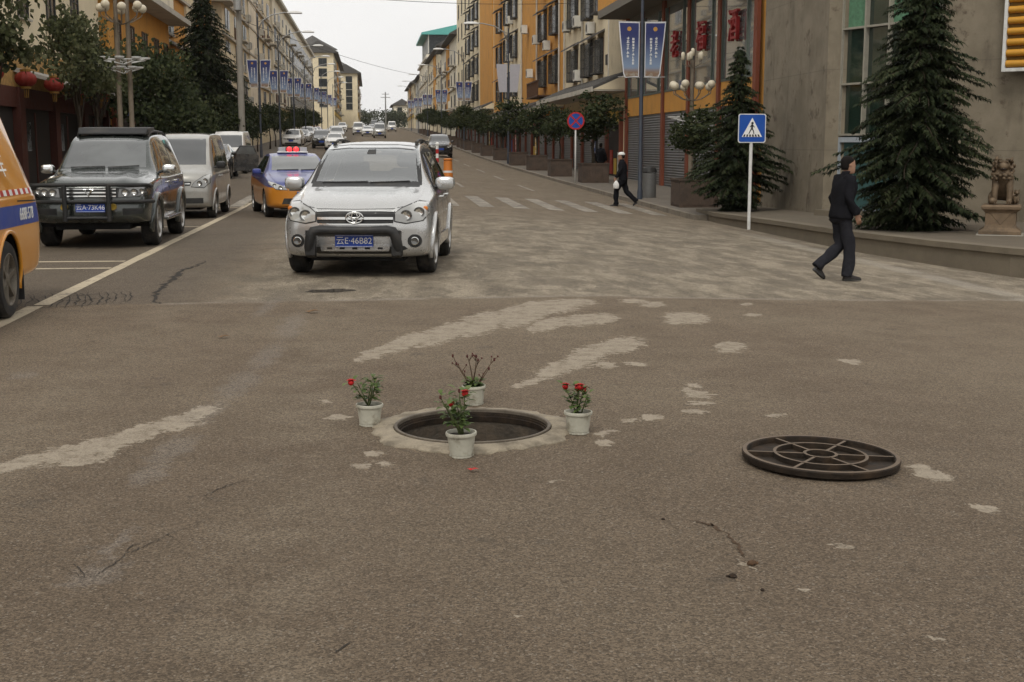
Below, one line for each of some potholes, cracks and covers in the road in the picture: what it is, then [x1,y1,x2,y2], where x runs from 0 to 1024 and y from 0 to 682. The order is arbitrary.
manhole cover [742,435,901,480]
manhole cover [371,407,569,455]
crack [63,526,194,577]
crack [692,520,744,556]
crack [17,291,133,309]
